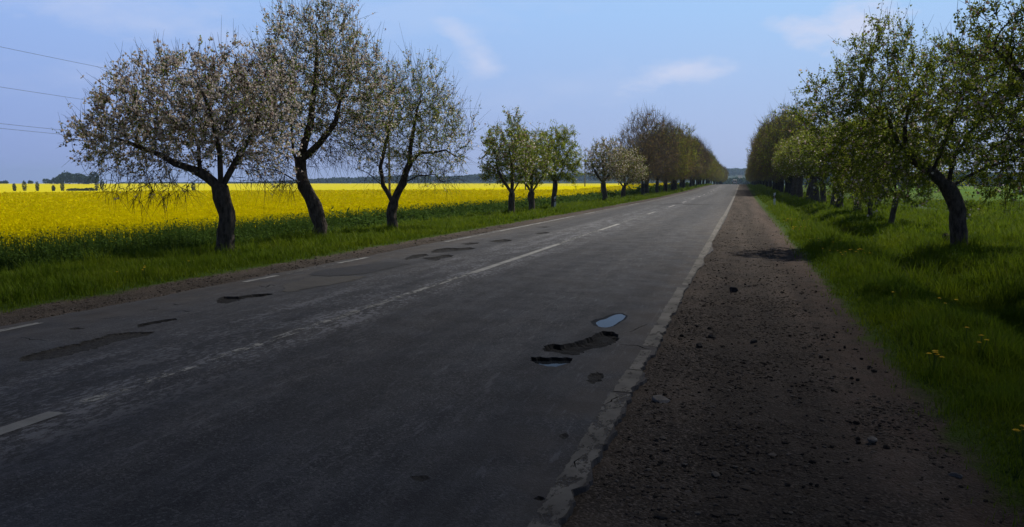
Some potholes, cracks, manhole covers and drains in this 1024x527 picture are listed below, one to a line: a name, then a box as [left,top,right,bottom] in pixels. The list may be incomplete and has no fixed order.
pothole [137,318,177,327]
pothole [590,313,628,328]
pothole [17,331,155,362]
pothole [542,331,619,355]
pothole [530,357,573,367]
pothole [216,293,272,304]
pothole [586,371,604,384]
